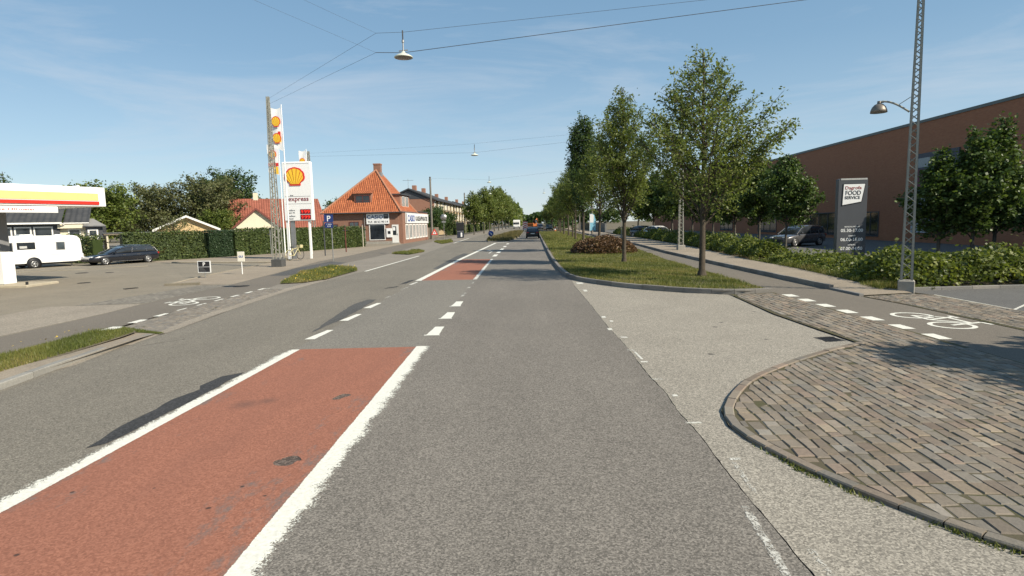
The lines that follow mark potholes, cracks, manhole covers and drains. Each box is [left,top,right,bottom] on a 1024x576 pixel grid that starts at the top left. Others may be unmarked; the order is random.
pothole [273,456,302,466]
